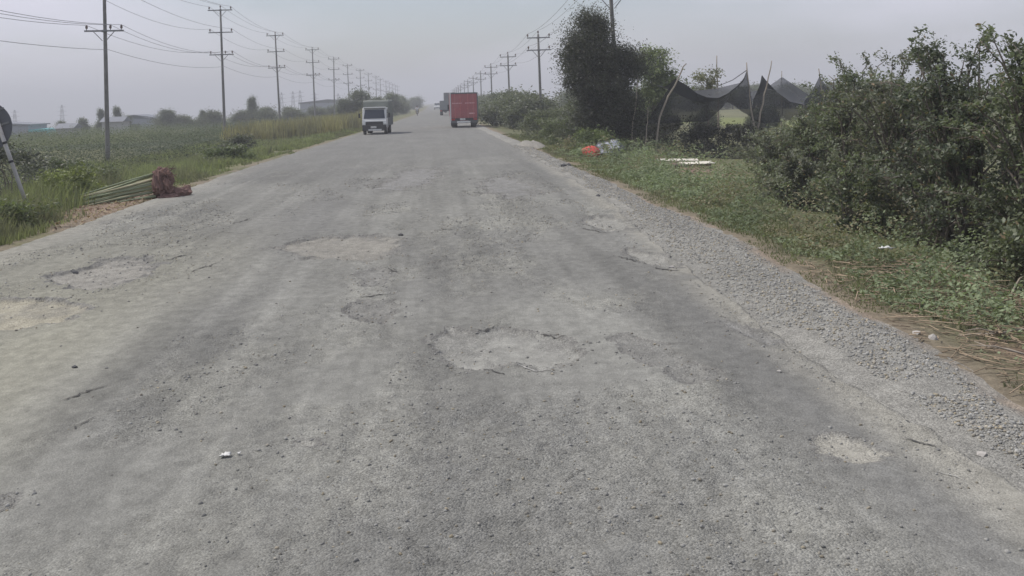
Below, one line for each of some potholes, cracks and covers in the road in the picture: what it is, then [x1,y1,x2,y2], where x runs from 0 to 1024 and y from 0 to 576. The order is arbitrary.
pothole [577,215,639,232]
pothole [604,332,729,385]
pothole [617,247,686,268]
pothole [40,255,172,291]
pothole [420,326,589,373]
pothole [340,299,403,325]
